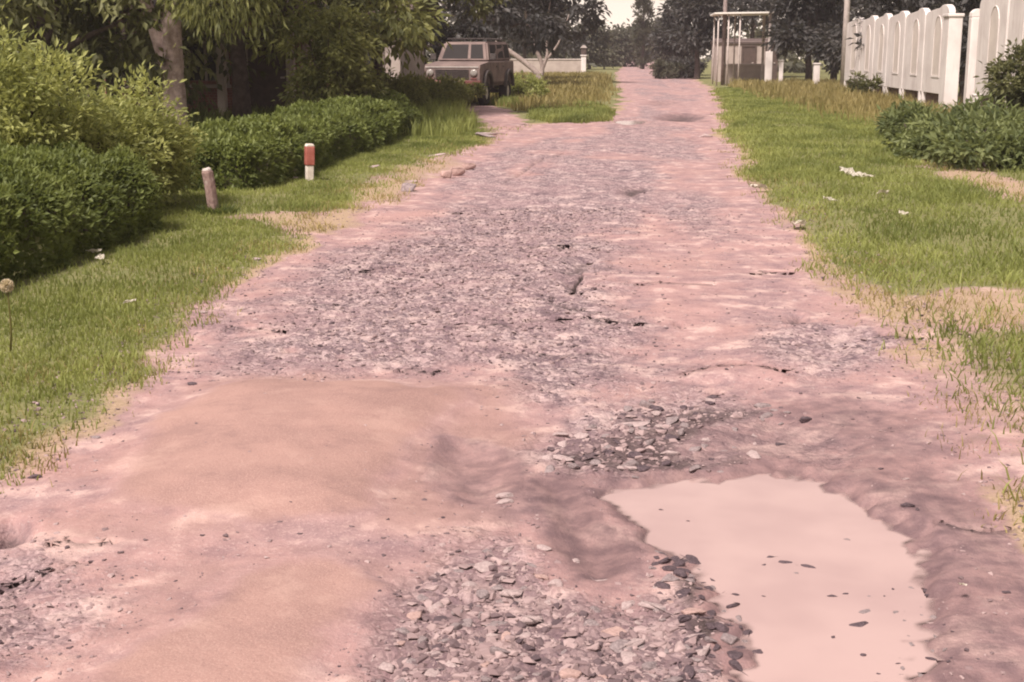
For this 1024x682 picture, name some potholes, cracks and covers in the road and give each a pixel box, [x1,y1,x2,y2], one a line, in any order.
pothole [0,517,42,549]
pothole [542,256,606,295]
pothole [610,184,661,198]
pothole [648,112,716,122]
pothole [572,459,977,682]
crack [681,361,789,376]
